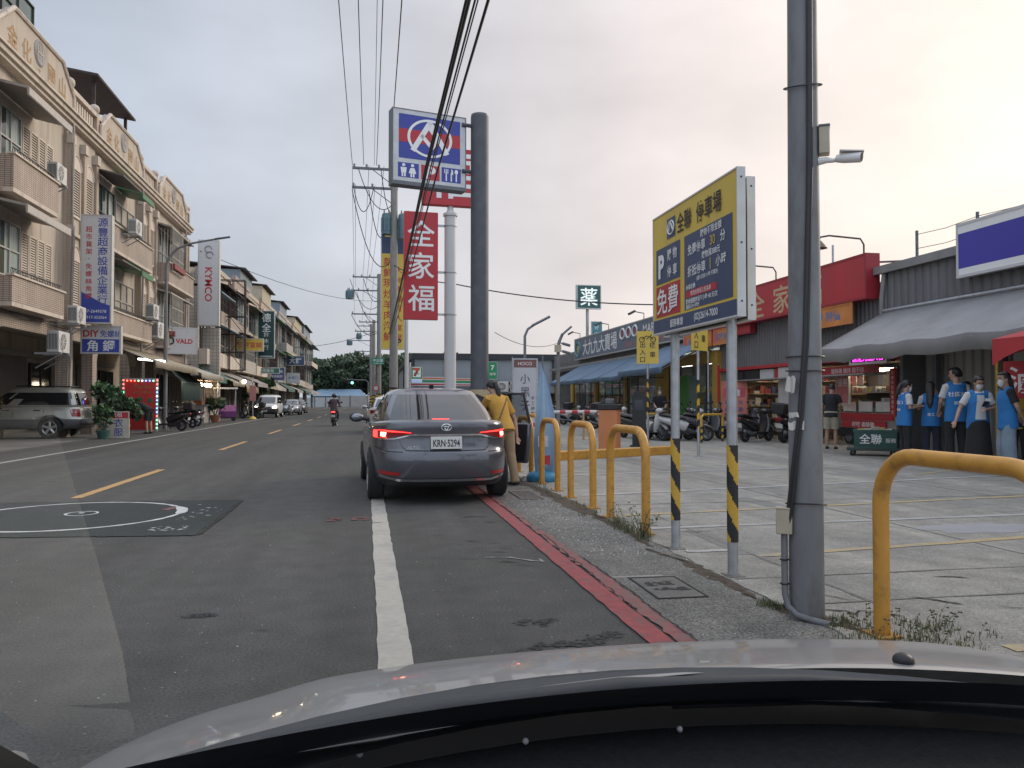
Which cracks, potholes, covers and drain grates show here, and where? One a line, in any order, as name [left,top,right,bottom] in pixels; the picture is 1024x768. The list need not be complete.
manhole cover [611,575,709,600]
